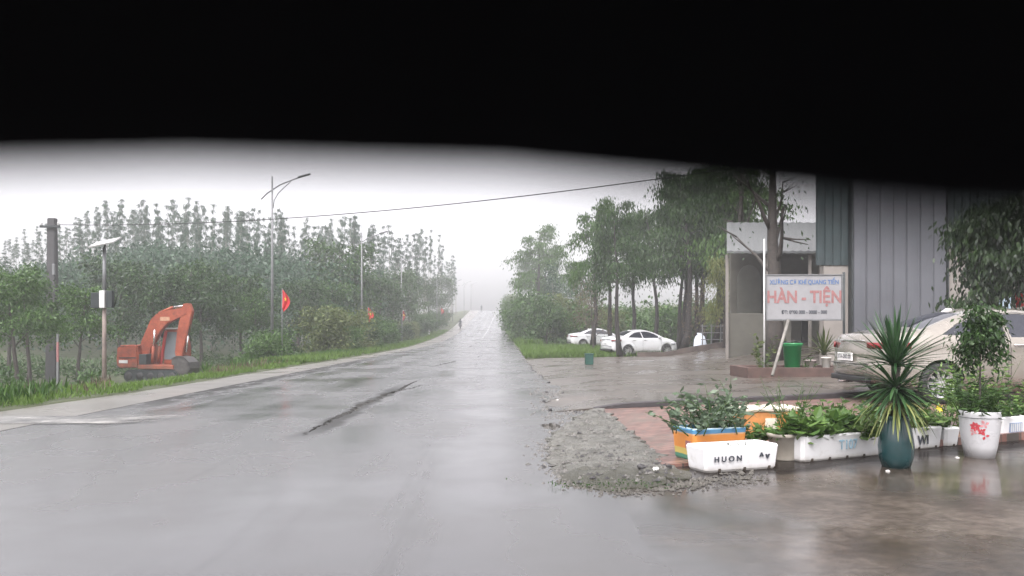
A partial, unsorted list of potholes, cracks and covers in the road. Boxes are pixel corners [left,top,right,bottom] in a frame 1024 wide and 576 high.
crack [304,381,420,435]
